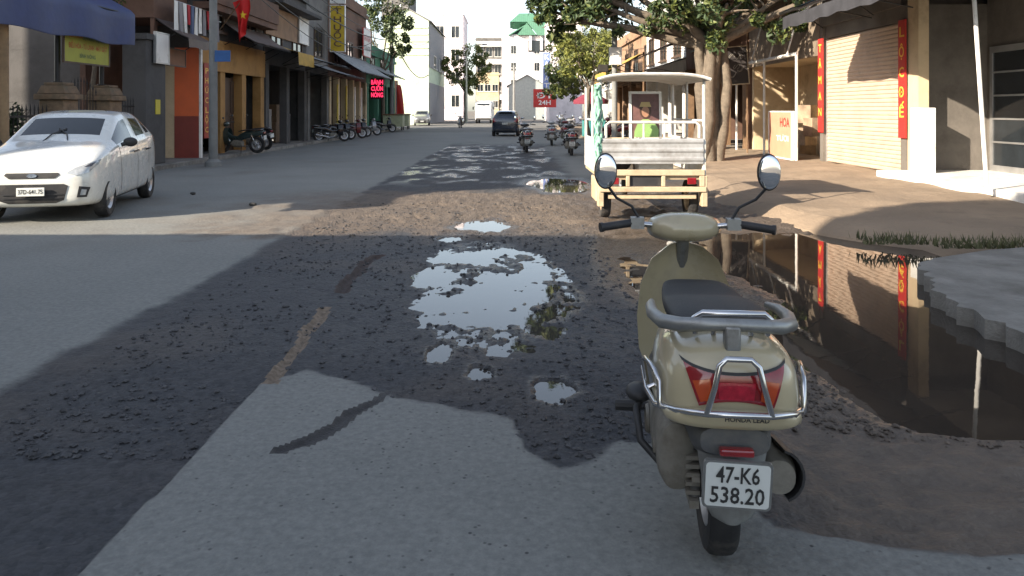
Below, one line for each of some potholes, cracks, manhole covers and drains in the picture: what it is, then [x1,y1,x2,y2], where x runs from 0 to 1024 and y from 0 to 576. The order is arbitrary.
pothole [604,232,1024,441]
pothole [422,339,456,365]
pothole [520,176,591,195]
pothole [463,361,498,383]
crack [261,254,392,454]
pothole [448,218,517,233]
pothole [530,375,583,407]
pothole [408,241,589,359]
